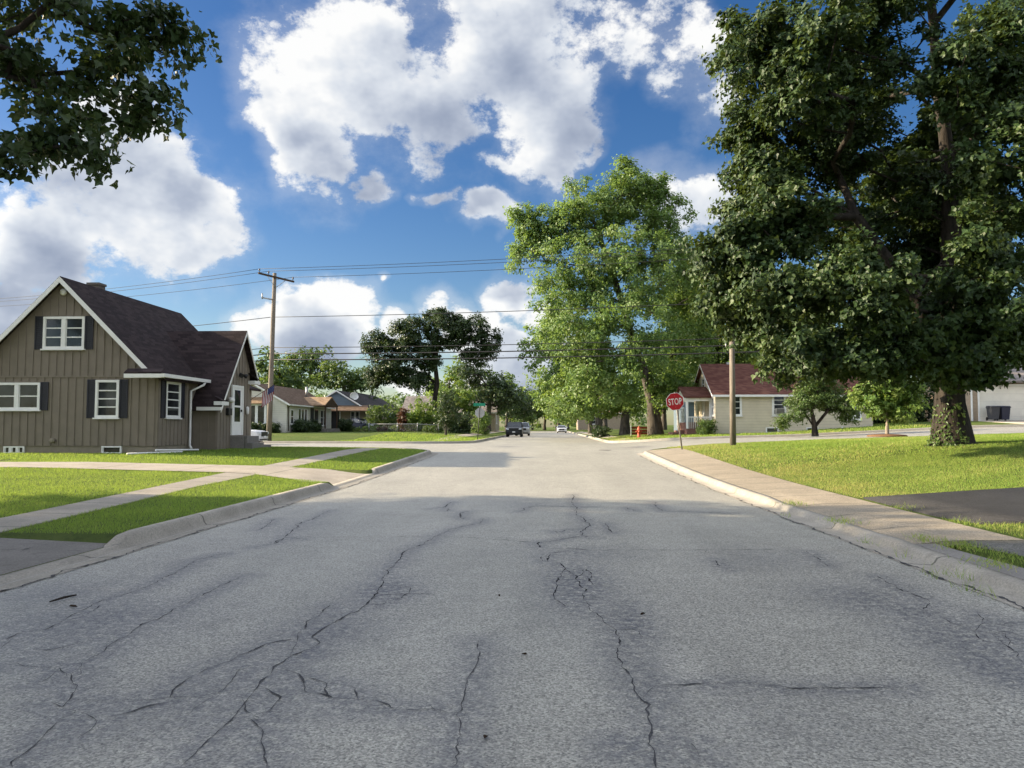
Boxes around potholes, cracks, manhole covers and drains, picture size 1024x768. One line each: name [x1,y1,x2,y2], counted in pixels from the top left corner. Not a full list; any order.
crack [189,520,483,767]
crack [10,577,257,767]
crack [1,553,225,650]
crack [879,577,1024,658]
crack [522,496,883,767]
